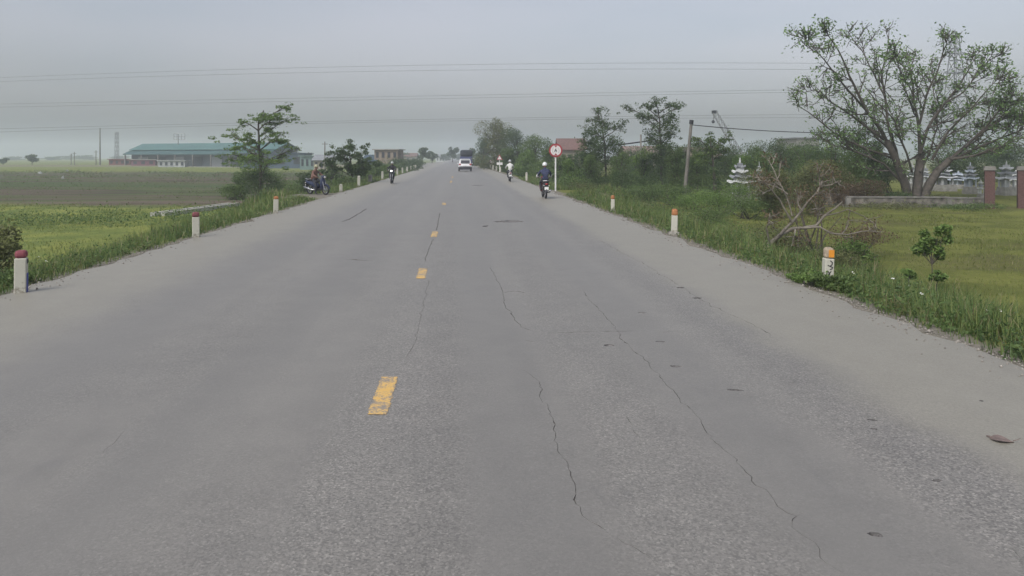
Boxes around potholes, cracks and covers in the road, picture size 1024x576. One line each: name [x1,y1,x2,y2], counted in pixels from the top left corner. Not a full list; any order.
crack [568,293,843,573]
crack [521,369,657,566]
